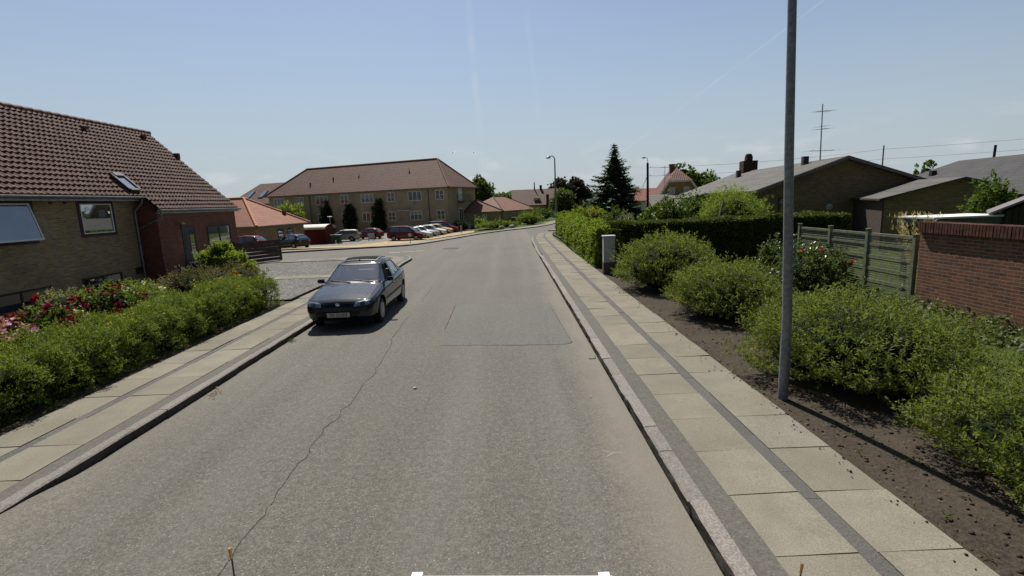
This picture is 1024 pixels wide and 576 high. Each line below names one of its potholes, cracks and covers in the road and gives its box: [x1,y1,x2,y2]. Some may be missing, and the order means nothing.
crack [217,316,410,576]
